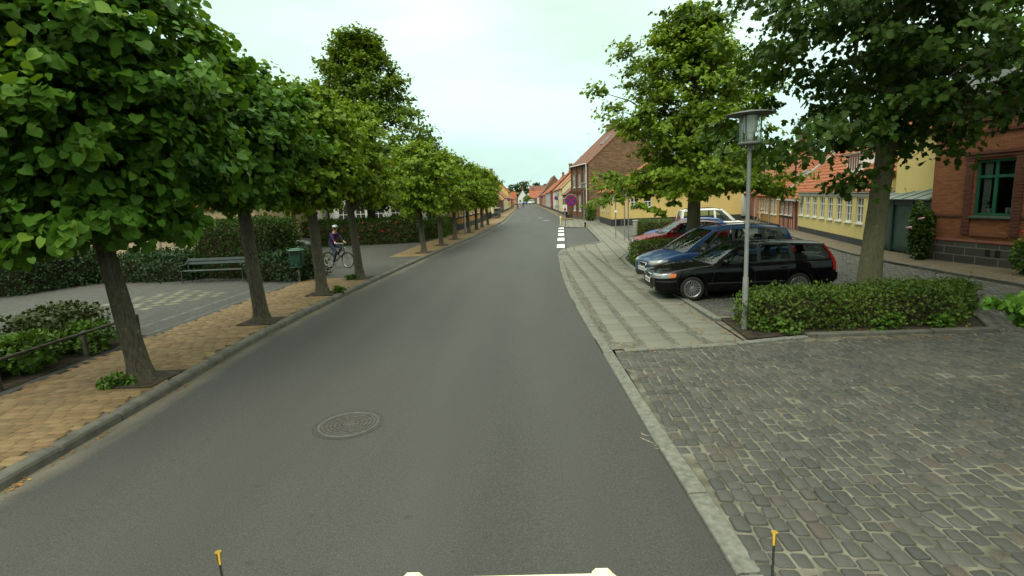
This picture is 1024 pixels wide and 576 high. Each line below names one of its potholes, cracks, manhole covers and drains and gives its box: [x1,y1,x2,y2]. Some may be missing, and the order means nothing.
manhole cover [312,410,385,439]
